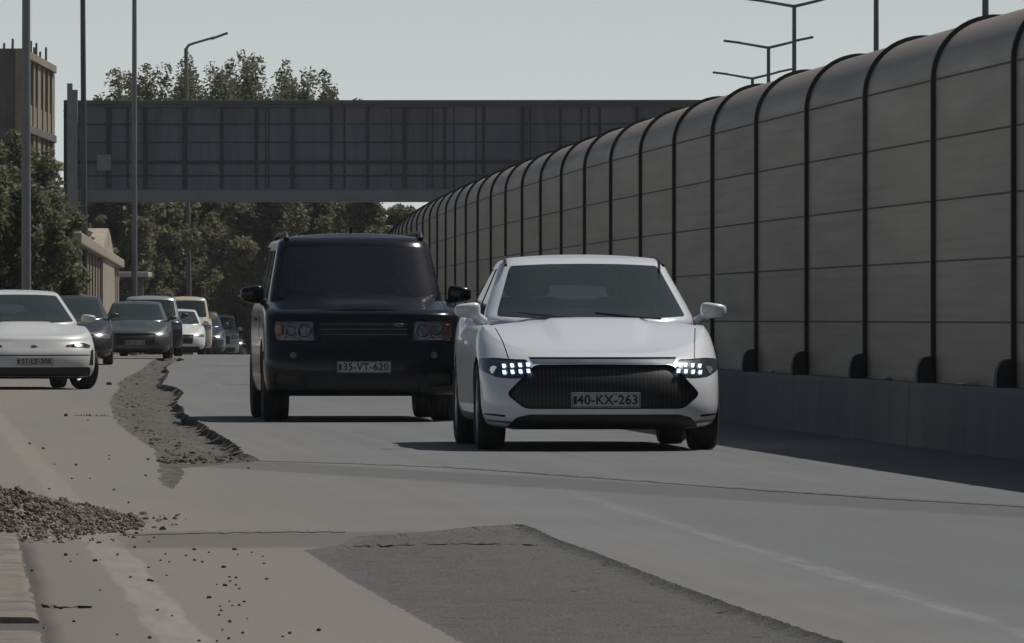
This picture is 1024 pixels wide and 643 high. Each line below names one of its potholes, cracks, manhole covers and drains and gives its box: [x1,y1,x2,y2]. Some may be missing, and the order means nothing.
pothole [109,358,259,489]
